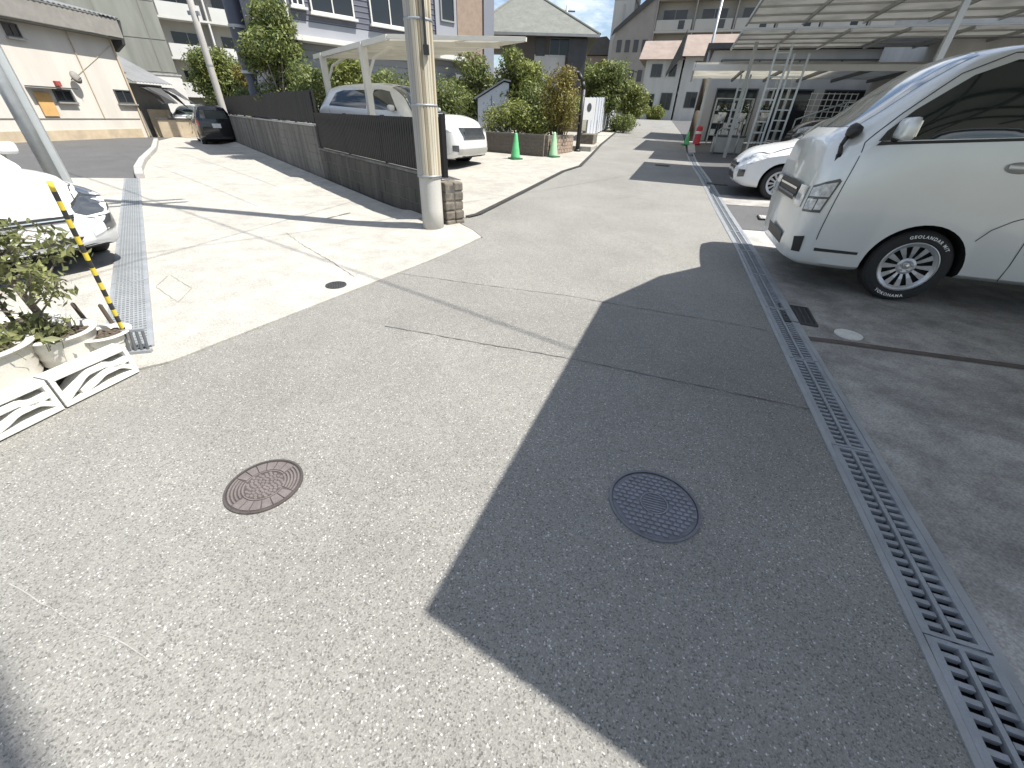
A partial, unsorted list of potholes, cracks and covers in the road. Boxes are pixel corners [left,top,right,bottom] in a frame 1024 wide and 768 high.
manhole cover [223,459,304,515]
drain grate [739,250,768,275]
drain grate [123,178,141,188]
drain grate [121,188,142,201]
drain grate [729,231,754,251]
drain grate [720,216,741,232]
drain grate [923,634,1024,768]
manhole cover [325,281,347,289]
crack [9,583,151,662]
drain grate [766,307,818,362]
drain grate [790,357,872,453]
utility cover [834,329,863,341]
